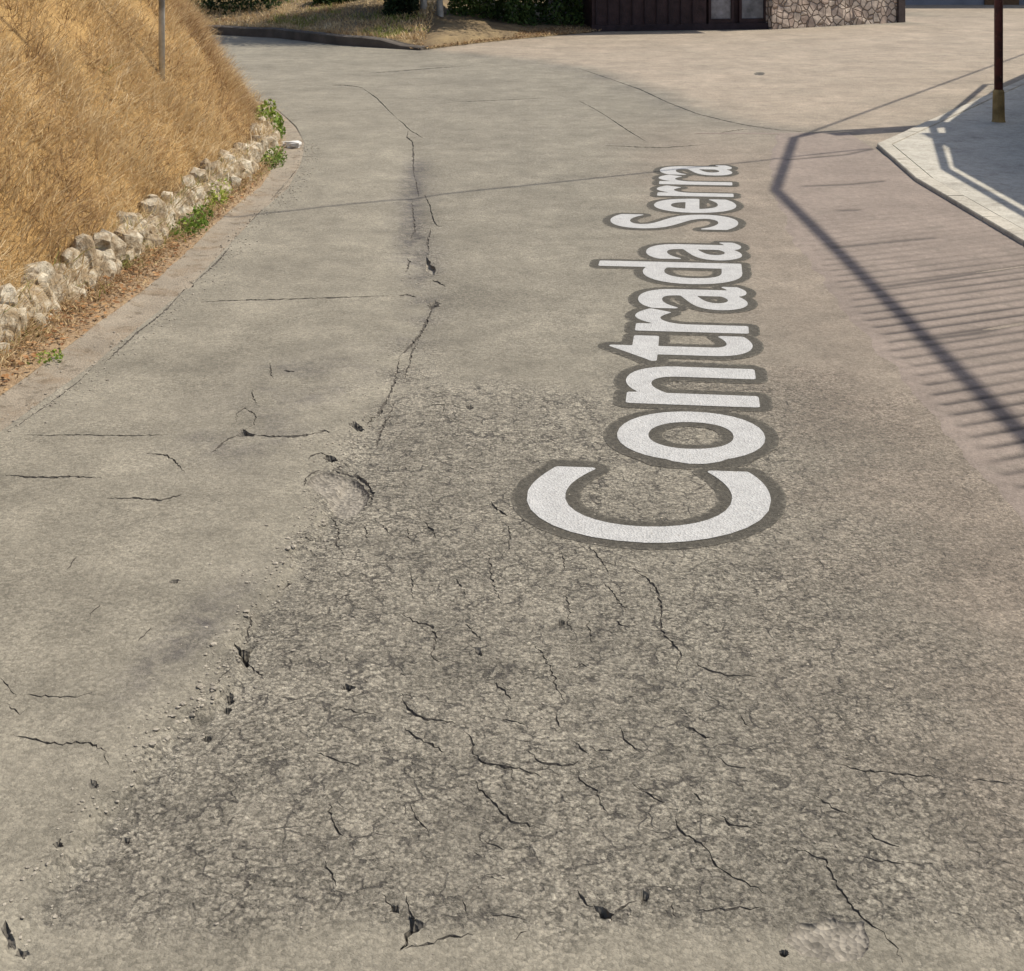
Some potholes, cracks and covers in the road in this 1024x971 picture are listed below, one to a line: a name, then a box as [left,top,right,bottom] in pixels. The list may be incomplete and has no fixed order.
crack [411,196,442,238]
crack [632,783,766,917]
crack [589,547,755,677]
crack [399,120,421,177]
crack [402,614,441,663]
pothole [307,473,370,519]
crack [833,763,937,778]
crack [14,735,109,765]
crack [564,591,598,644]
crack [327,805,347,838]
crack [384,895,473,949]
crack [488,502,511,604]
